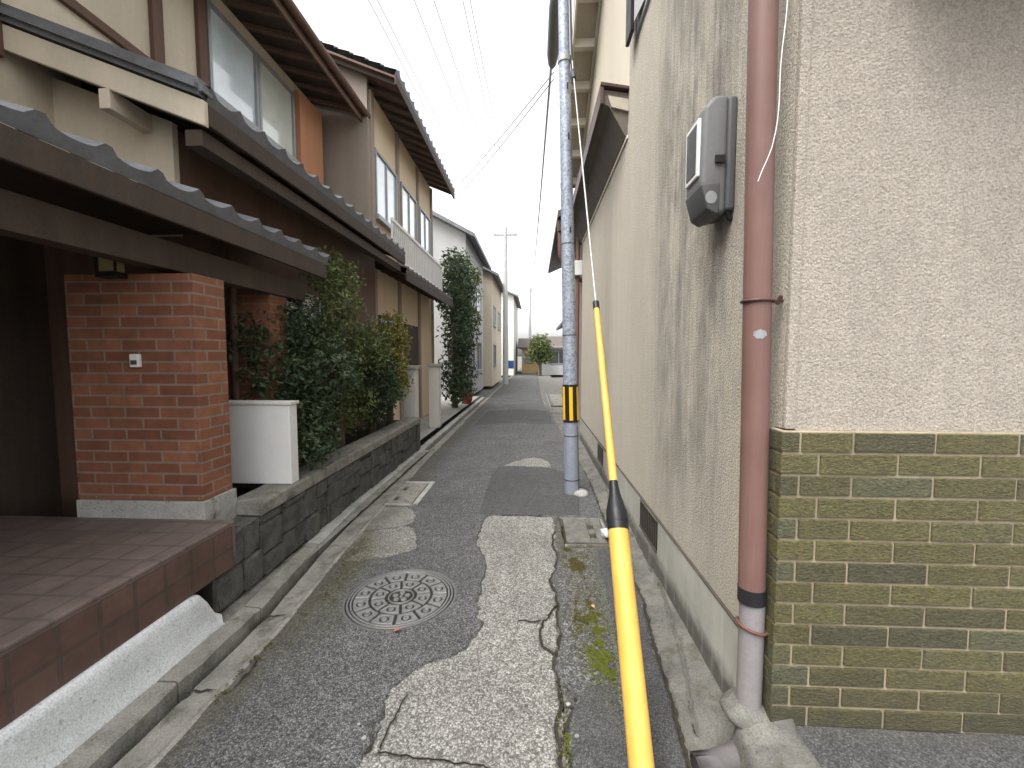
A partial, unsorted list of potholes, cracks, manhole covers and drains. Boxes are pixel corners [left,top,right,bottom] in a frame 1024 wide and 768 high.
crack [364,693,488,768]
manhole cover [342,569,457,631]
crack [502,515,577,768]
